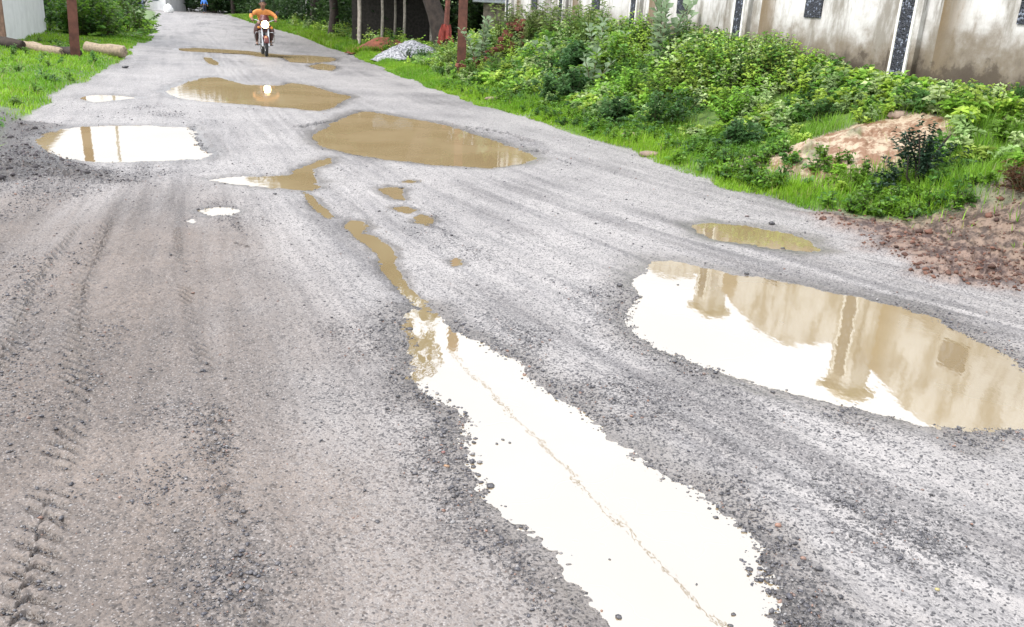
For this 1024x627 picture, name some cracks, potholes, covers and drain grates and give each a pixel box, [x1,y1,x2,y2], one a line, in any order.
pothole [685,220,830,254]
pothole [298,108,551,170]
pothole [77,93,140,103]
pothole [192,204,245,218]
pothole [374,184,410,201]
pothole [152,75,362,113]
pothole [441,254,469,268]
pothole [386,204,423,215]
pothole [201,56,223,67]
pothole [339,218,435,310]
pothole [606,254,1024,445]
pothole [204,156,338,192]
